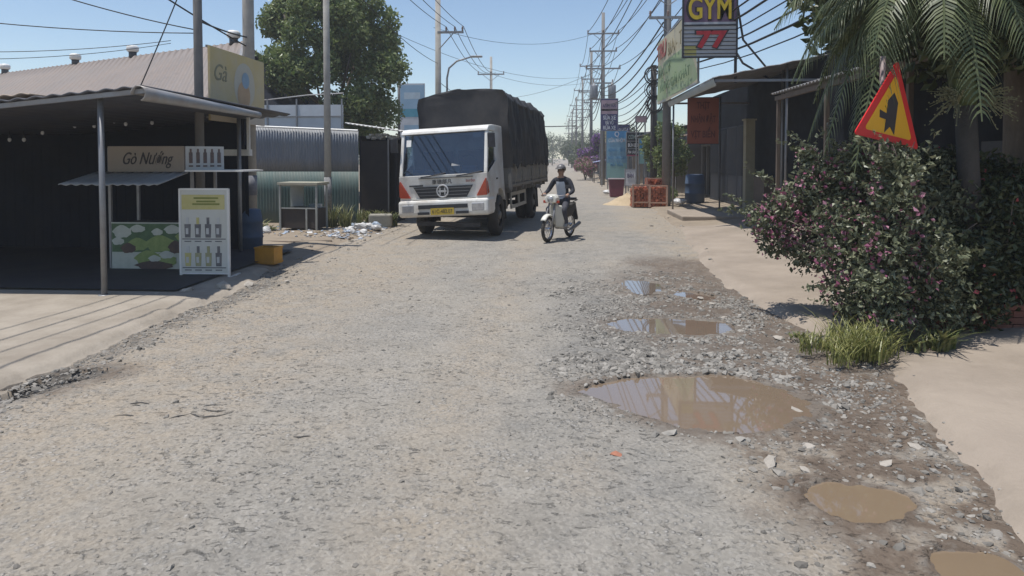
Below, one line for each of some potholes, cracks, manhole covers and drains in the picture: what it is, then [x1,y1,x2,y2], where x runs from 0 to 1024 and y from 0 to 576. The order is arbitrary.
pothole [617,278,670,298]
pothole [562,369,839,443]
pothole [0,363,128,408]
pothole [787,475,933,532]
pothole [596,314,748,339]
crack [171,404,233,418]
pothole [912,541,1024,576]
